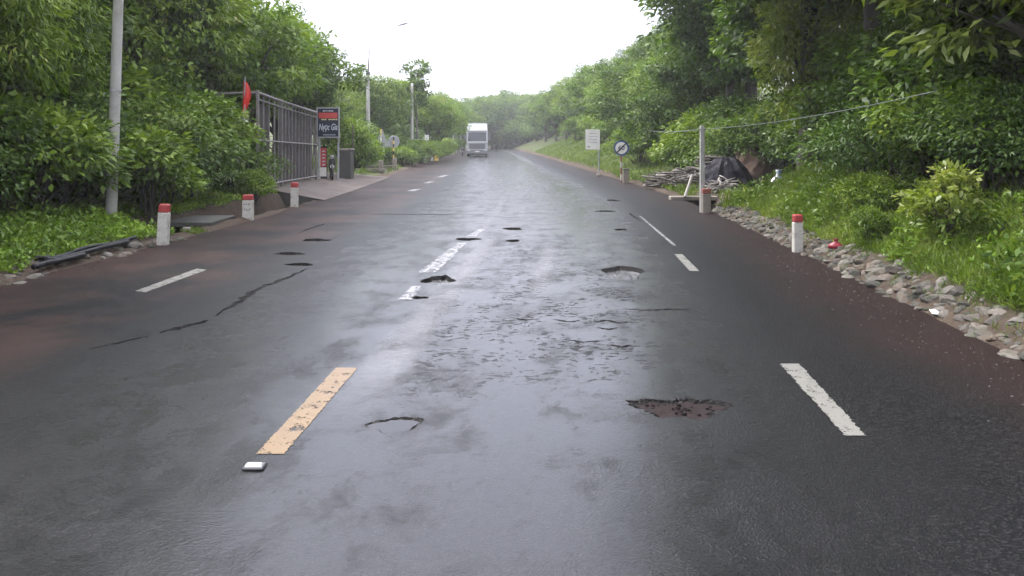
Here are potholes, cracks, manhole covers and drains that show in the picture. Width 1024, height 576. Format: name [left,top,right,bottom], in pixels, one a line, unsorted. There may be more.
crack [517,309,698,348]
pothole [625,397,736,420]
pothole [364,417,424,434]
pothole [420,275,456,283]
pothole [601,266,644,280]
crack [90,269,306,349]
